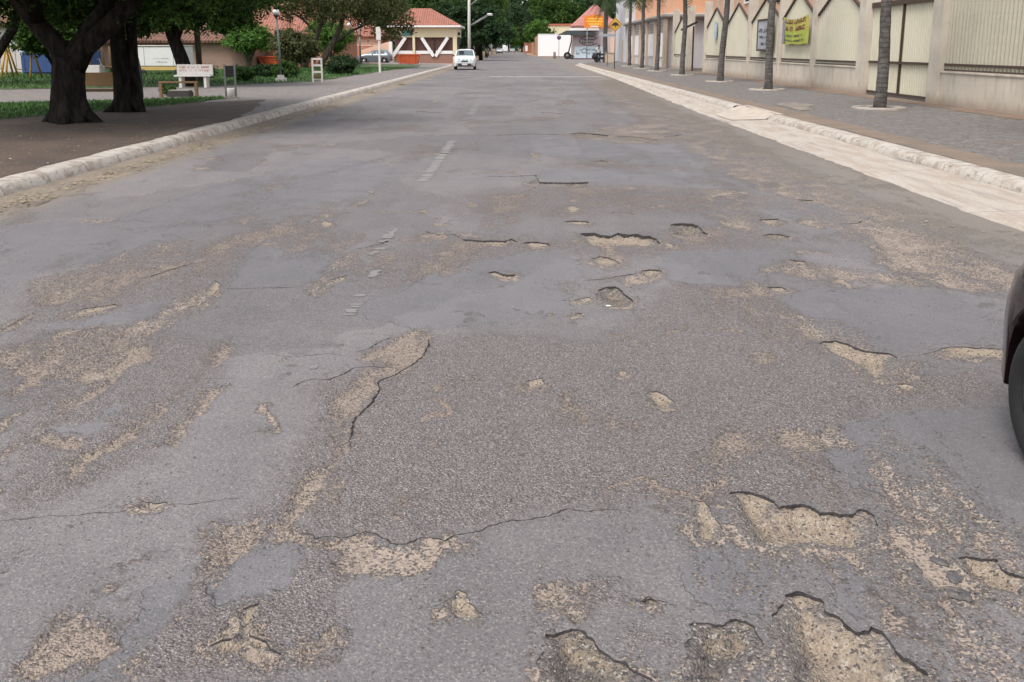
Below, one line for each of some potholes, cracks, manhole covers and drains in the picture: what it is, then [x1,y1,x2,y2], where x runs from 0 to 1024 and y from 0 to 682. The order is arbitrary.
crack [5,506,136,521]
pothole [577,233,660,247]
pothole [933,346,1002,359]
pothole [668,223,708,237]
pothole [595,286,634,308]
pothole [486,271,516,279]
pothole [527,179,588,189]
pothole [956,556,1024,600]
crack [295,508,631,545]
pothole [769,591,929,682]
pothole [725,491,880,554]
pothole [817,340,898,380]
